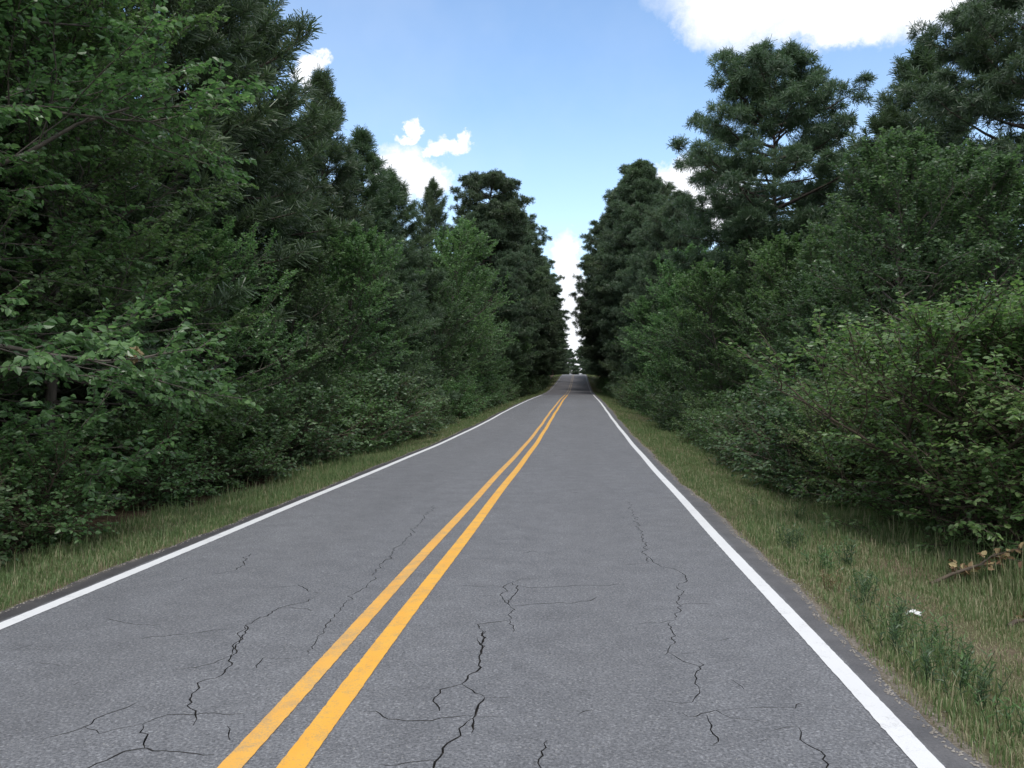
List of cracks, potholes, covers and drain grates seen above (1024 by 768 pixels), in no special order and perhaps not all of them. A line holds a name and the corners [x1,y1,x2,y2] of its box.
crack [42,586,317,768]
crack [776,727,831,768]
crack [364,579,614,768]
crack [308,506,434,654]
crack [628,504,802,744]
